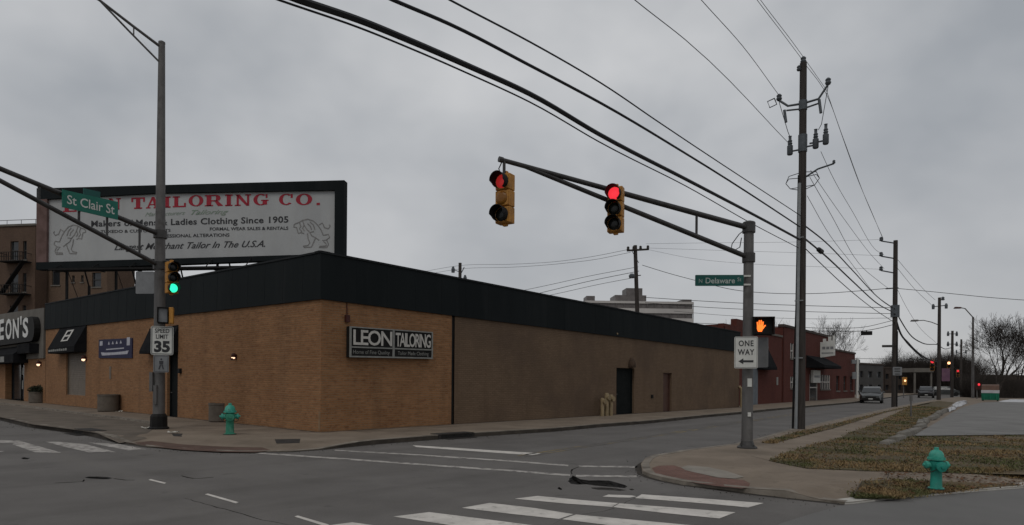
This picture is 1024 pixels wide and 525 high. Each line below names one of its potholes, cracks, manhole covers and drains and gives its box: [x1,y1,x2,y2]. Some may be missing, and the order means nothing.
pothole [568,476,627,488]
